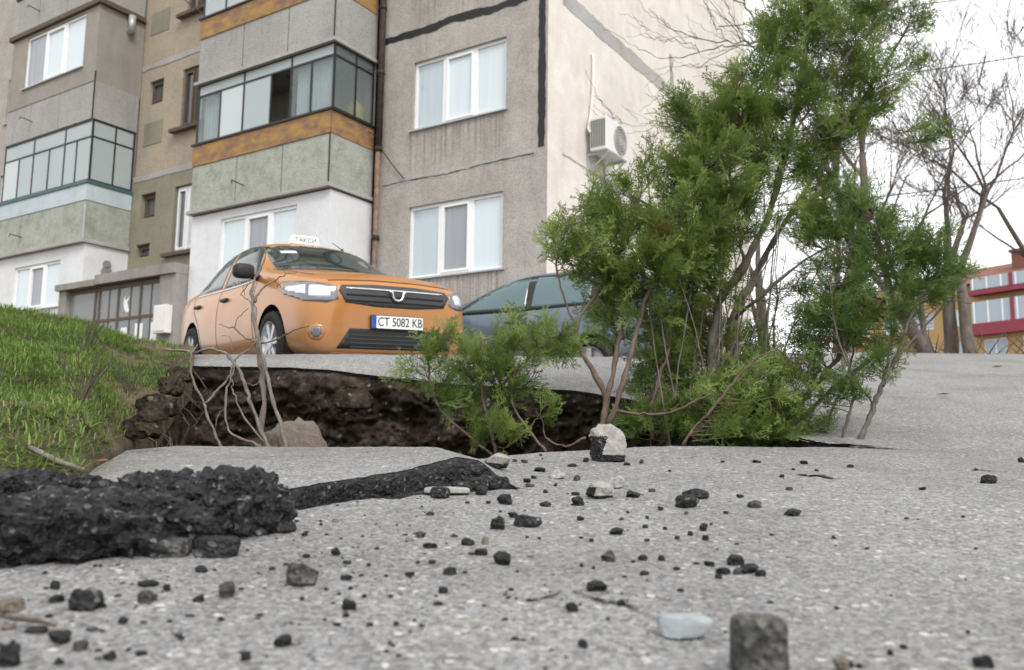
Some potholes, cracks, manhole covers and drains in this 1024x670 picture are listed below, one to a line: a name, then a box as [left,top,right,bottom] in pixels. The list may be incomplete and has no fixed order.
pothole [159,366,871,489]
